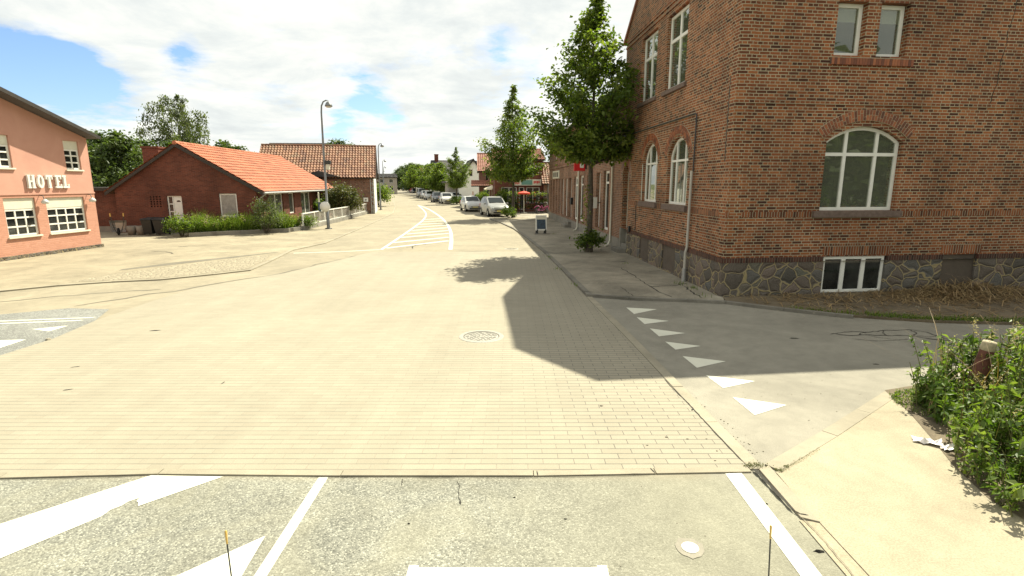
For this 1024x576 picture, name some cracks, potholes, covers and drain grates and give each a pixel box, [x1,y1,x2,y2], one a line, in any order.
crack [832,329,955,341]
manhole cover [459,330,504,343]
manhole cover [675,538,704,559]
crack [16,469,654,504]
